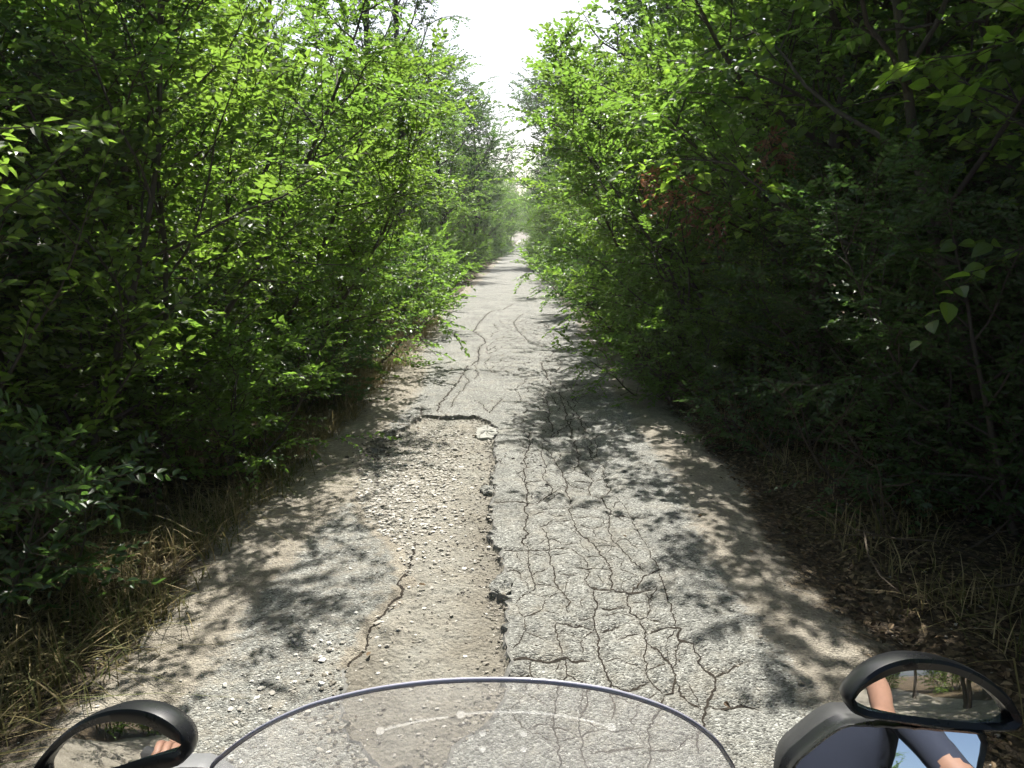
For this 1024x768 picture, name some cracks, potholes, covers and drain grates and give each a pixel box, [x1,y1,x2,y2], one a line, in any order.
crack [484,320,758,768]
crack [347,542,416,667]
crack [420,306,529,416]
